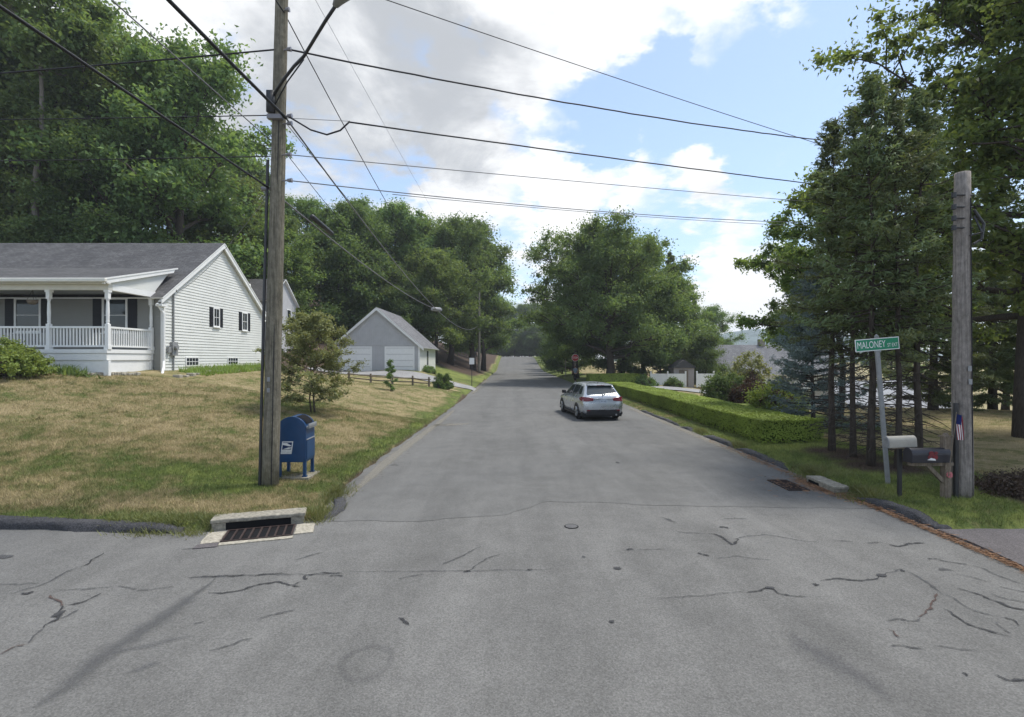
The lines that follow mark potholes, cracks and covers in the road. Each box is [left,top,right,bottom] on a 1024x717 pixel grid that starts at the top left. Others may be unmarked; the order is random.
crack [1,553,104,654]
crack [662,517,812,560]
crack [667,542,1024,650]
crack [189,547,545,593]
drain grate [767,476,849,494]
drain grate [192,507,315,549]
